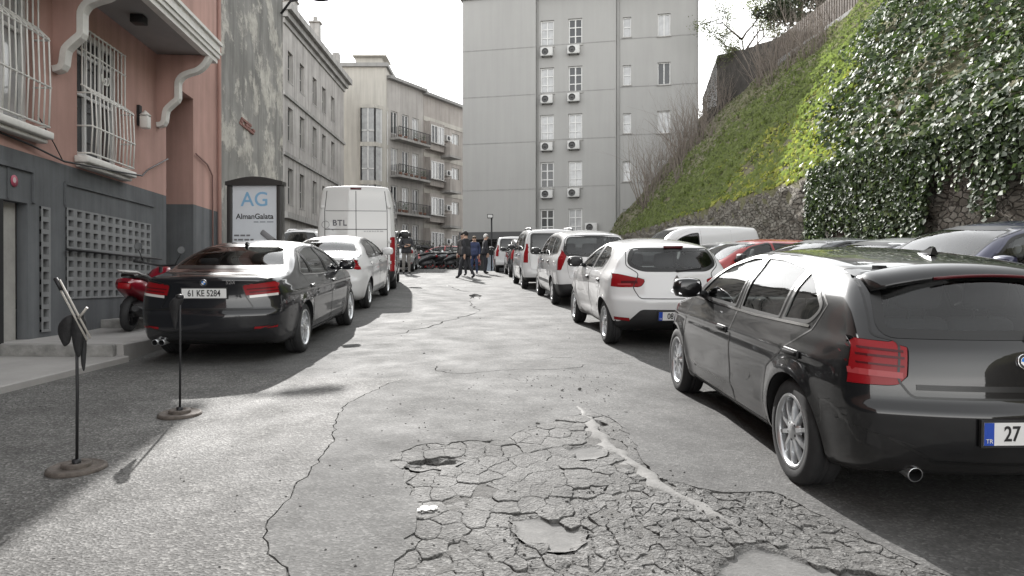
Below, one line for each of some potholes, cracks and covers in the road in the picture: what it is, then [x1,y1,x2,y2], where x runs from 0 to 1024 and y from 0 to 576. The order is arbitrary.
crack [387,286,480,336]
pothole [401,456,465,471]
crack [262,381,947,576]
pothole [508,514,591,552]
crack [435,357,621,382]
